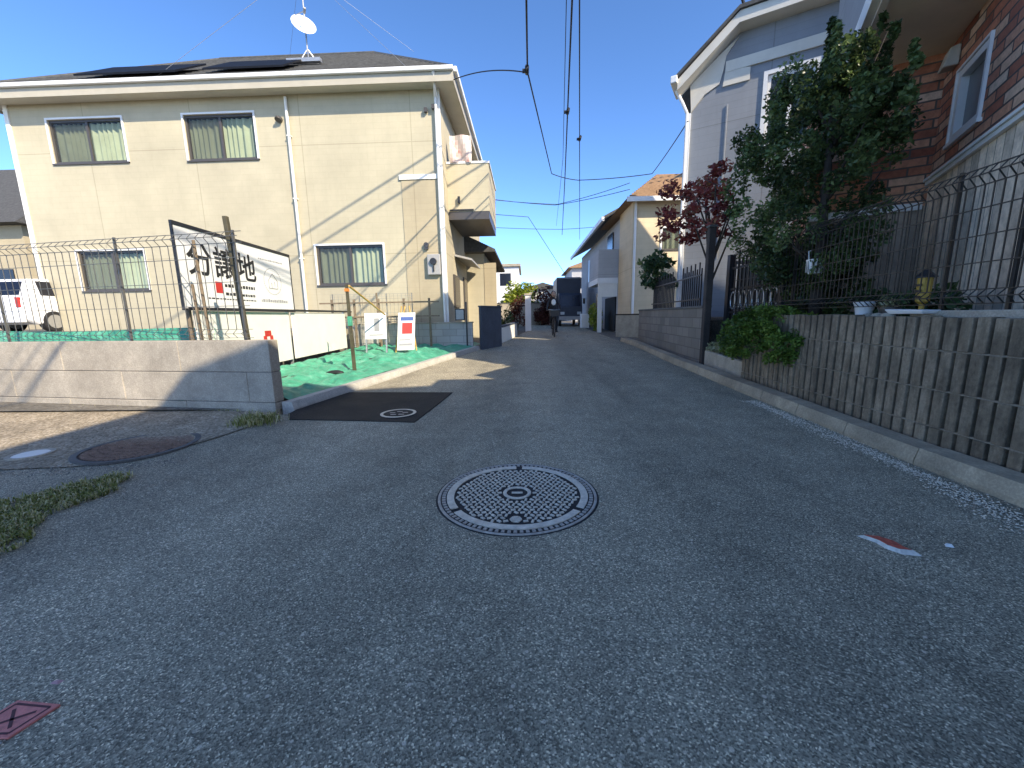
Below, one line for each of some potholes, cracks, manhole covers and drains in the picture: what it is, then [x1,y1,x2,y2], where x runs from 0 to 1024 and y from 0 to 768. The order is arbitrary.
manhole cover [68,433,201,466]
manhole cover [436,464,599,537]
